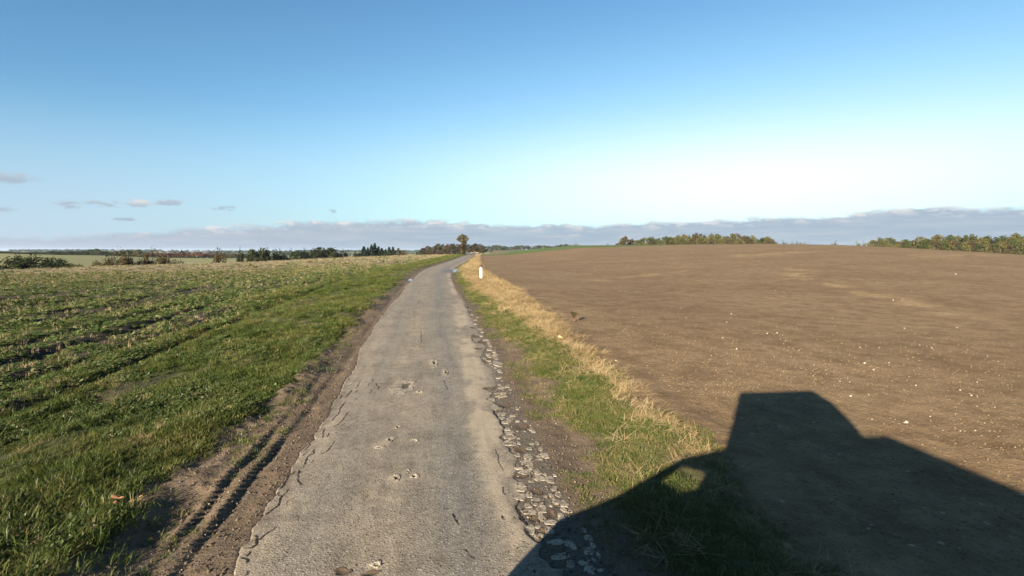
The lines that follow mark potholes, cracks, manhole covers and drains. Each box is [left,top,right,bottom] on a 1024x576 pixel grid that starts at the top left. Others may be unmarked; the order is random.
pothole [333,567,352,576]
crack [241,380,379,576]
pothole [388,379,417,398]
